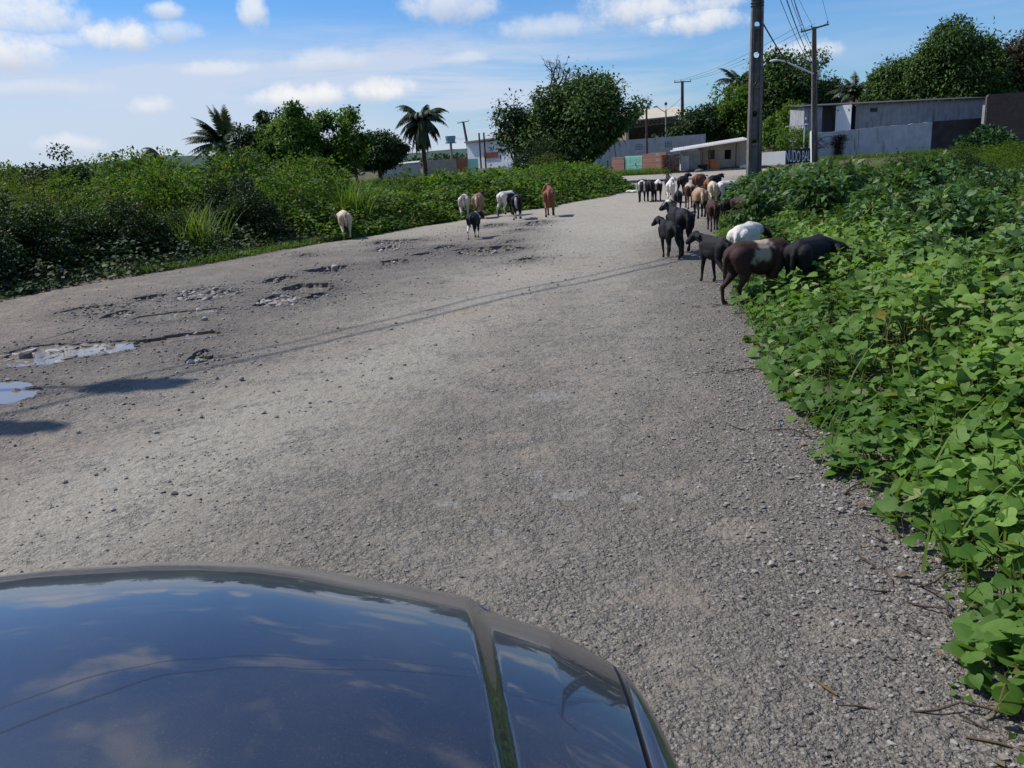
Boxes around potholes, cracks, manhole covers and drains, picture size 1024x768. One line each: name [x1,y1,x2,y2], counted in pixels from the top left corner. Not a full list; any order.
pothole [451,245,525,255]
pothole [281,283,342,292]
pothole [0,339,148,369]
pothole [0,380,44,404]
pothole [261,276,297,284]
pothole [176,287,240,301]
pothole [133,294,168,302]
pothole [185,349,214,366]
pothole [251,291,301,308]
pothole [100,310,137,319]
